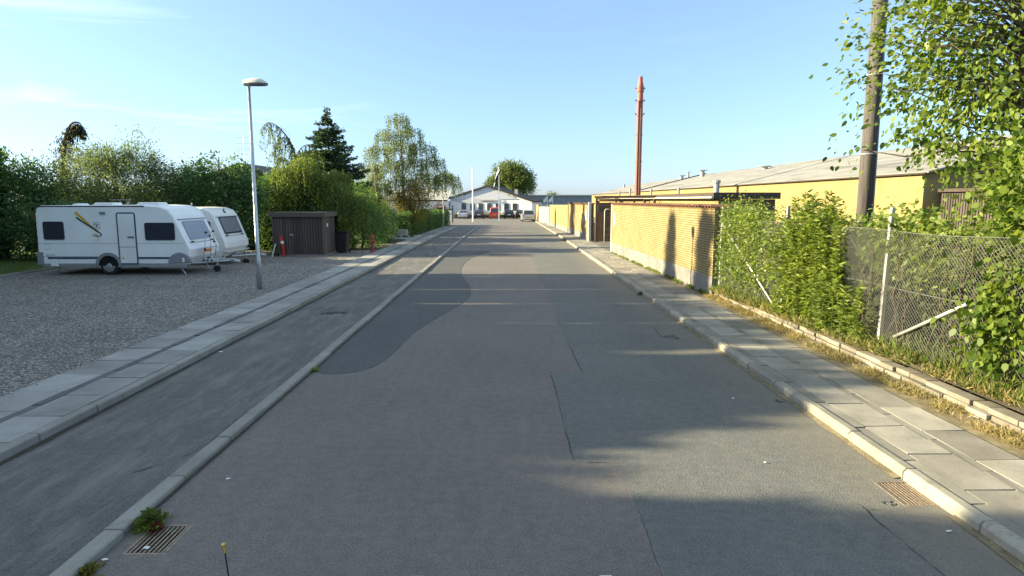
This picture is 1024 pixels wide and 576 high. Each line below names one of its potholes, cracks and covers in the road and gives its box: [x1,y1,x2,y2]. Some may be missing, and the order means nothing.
drain grate [873,481,939,506]
crack [857,503,945,576]
crack [551,331,607,463]
drain grate [122,525,193,555]
